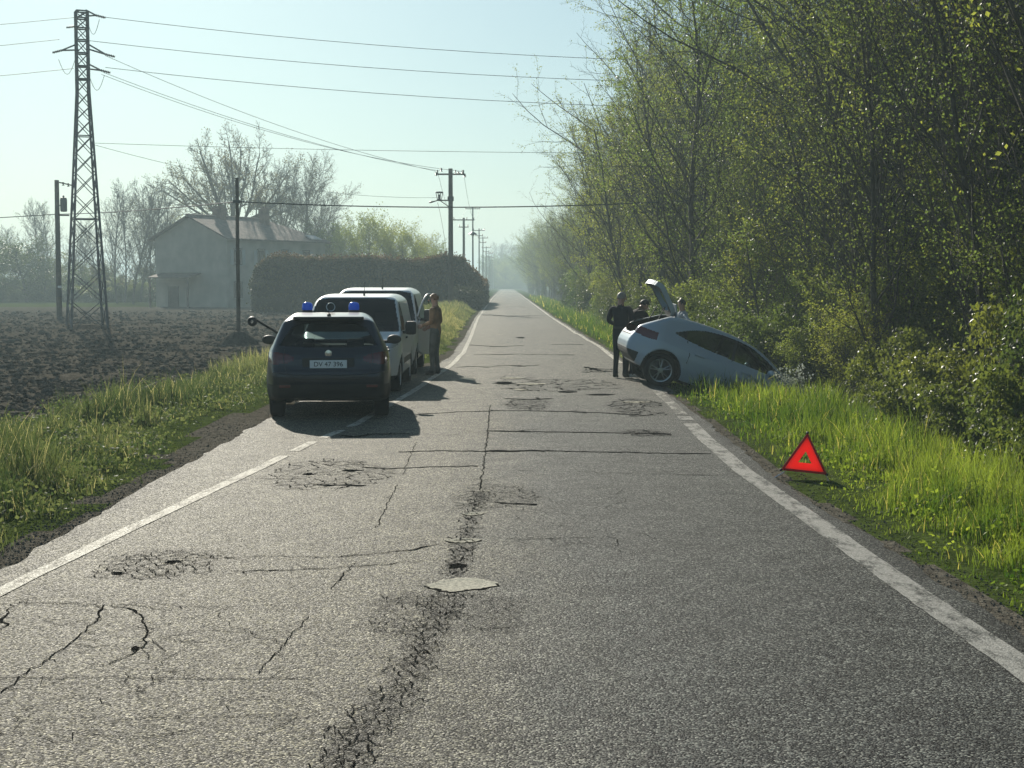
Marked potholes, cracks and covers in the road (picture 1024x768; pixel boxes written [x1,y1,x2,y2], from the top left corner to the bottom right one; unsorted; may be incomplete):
crack [0,591,305,751]
crack [365,591,443,639]
